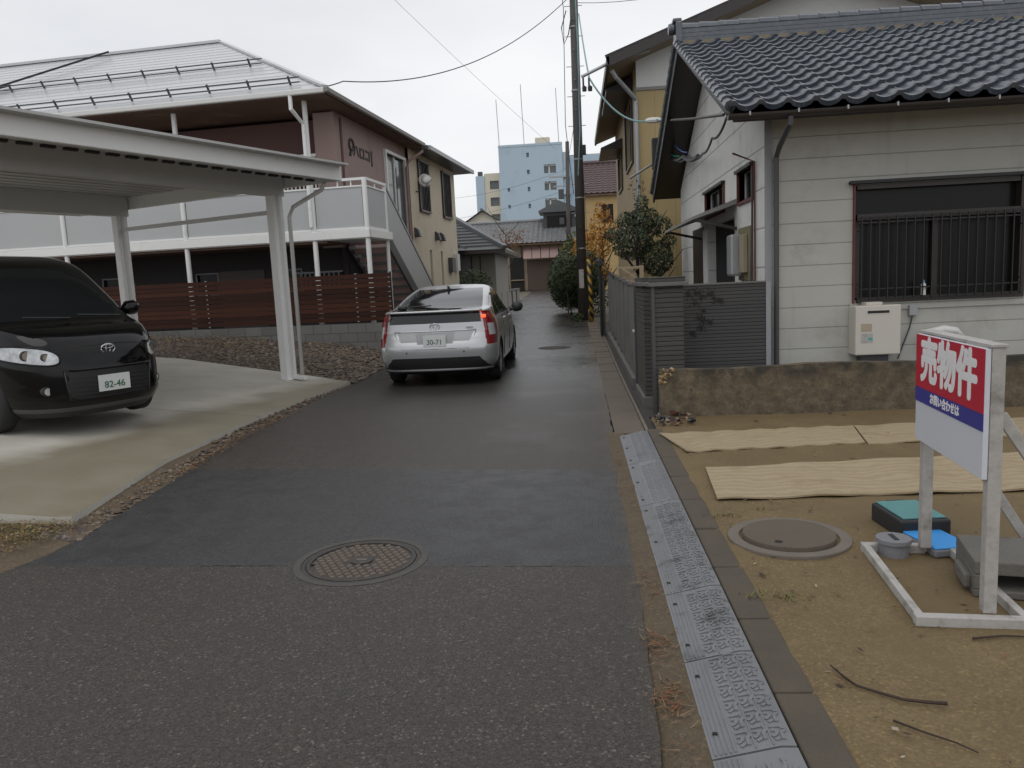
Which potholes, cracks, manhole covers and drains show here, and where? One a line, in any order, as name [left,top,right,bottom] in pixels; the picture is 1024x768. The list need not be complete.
manhole cover [293,538,429,587]
manhole cover [728,518,853,560]
